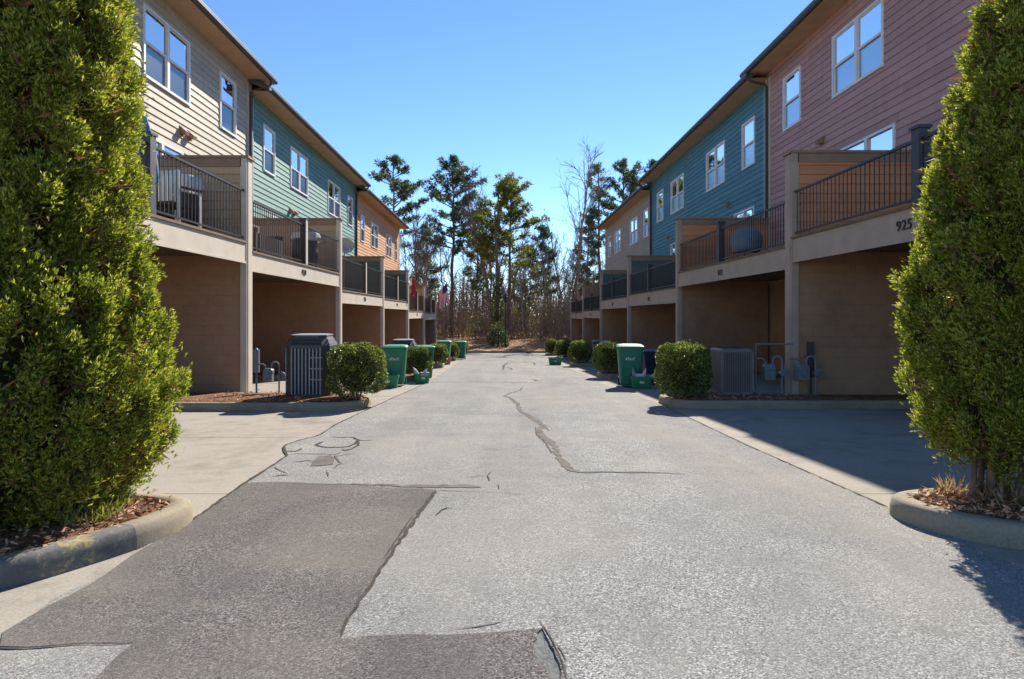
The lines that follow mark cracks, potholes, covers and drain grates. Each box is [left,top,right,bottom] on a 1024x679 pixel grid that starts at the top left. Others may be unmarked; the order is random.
crack [193,386,518,636]
pothole [533,628,561,679]
crack [502,362,579,384]
